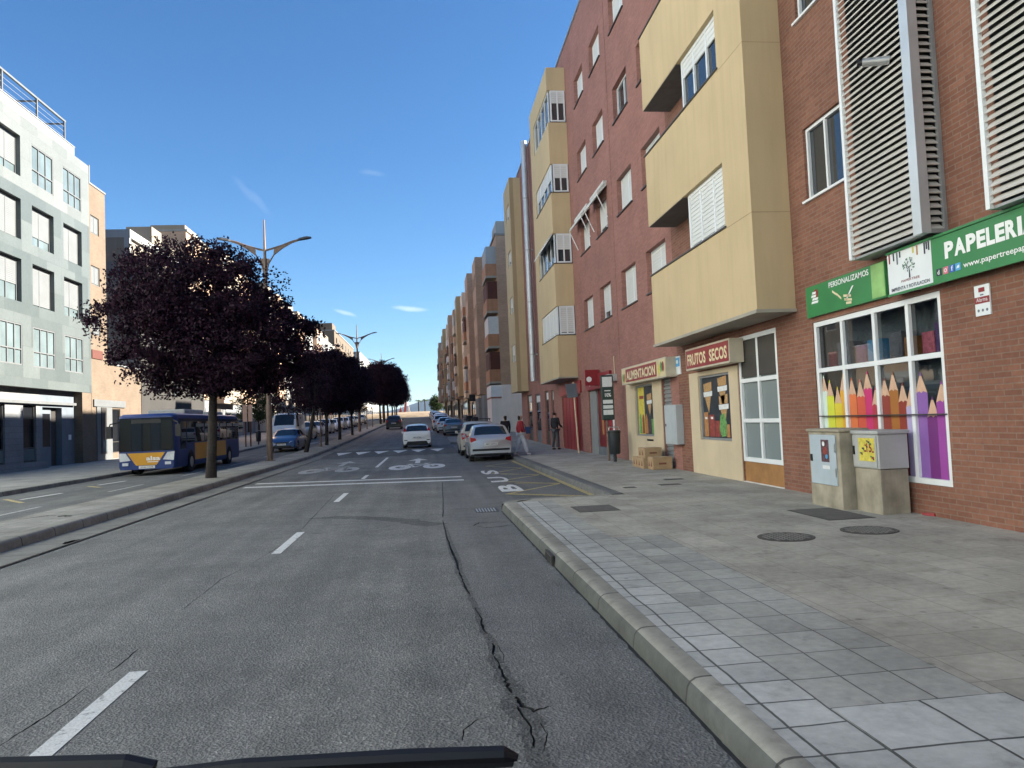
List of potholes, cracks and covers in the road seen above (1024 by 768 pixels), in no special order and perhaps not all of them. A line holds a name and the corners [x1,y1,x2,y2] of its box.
manhole cover [787,508,876,521]
manhole cover [840,526,899,535]
manhole cover [571,504,620,513]
manhole cover [757,532,816,542]
drain grate [545,549,554,566]
crack [0,649,138,746]
crack [425,483,549,750]
